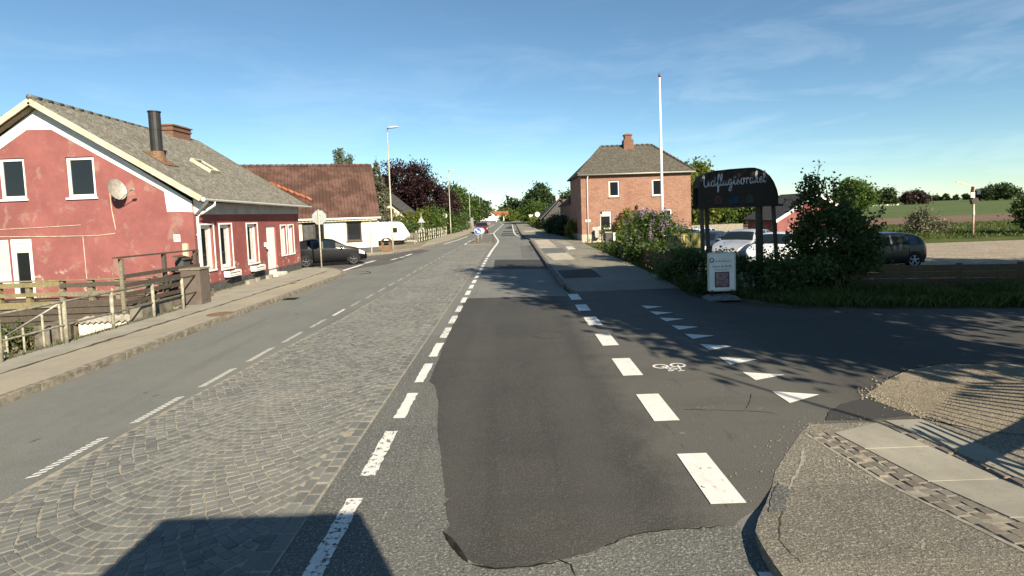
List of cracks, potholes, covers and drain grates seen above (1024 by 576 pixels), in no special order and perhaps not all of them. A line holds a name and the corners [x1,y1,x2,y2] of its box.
crack [471,559,576,576]
crack [776,447,808,508]
